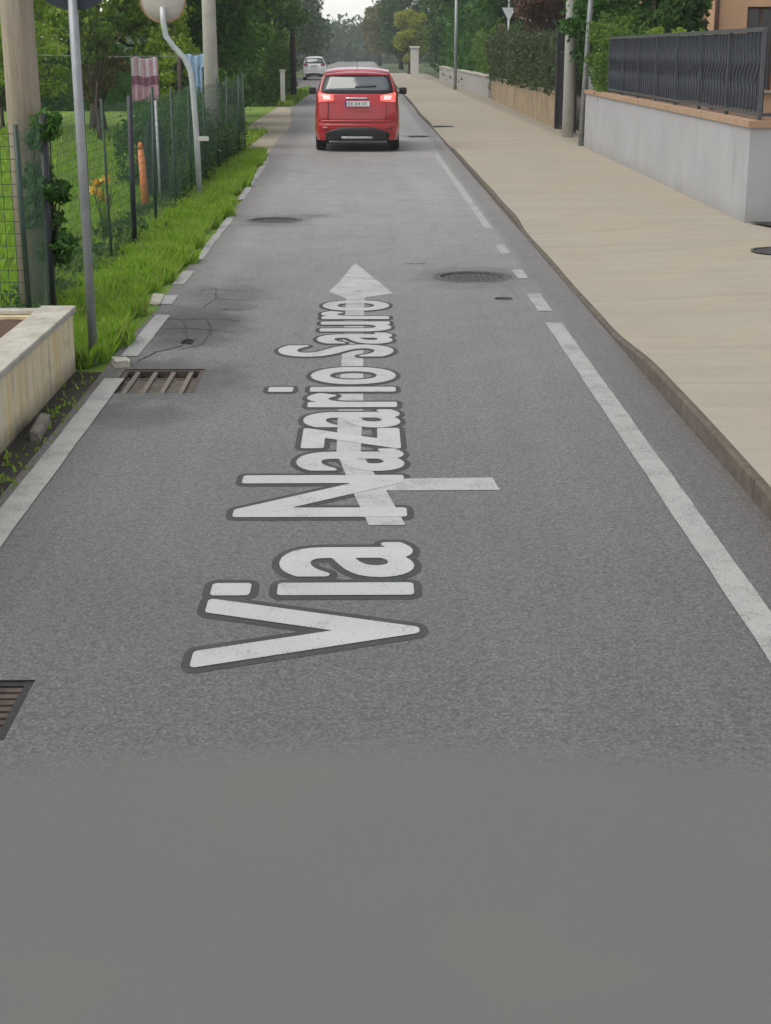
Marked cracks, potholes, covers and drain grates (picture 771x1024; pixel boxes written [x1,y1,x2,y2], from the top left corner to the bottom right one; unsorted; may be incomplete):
manhole cover [433,271,512,282]
drain grate [0,680,35,740]
manhole cover [750,247,771,255]
crack [138,288,252,361]
drain grate [114,369,206,393]
